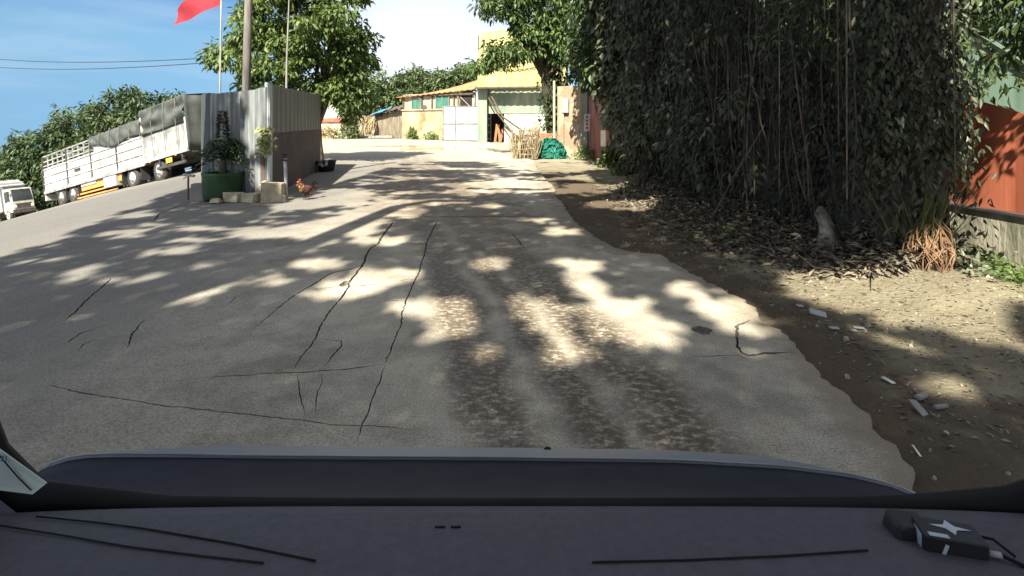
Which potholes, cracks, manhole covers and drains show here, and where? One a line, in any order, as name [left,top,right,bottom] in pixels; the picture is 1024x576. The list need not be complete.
crack [54,223,395,441]
crack [702,320,787,357]
pothole [691,326,712,335]
